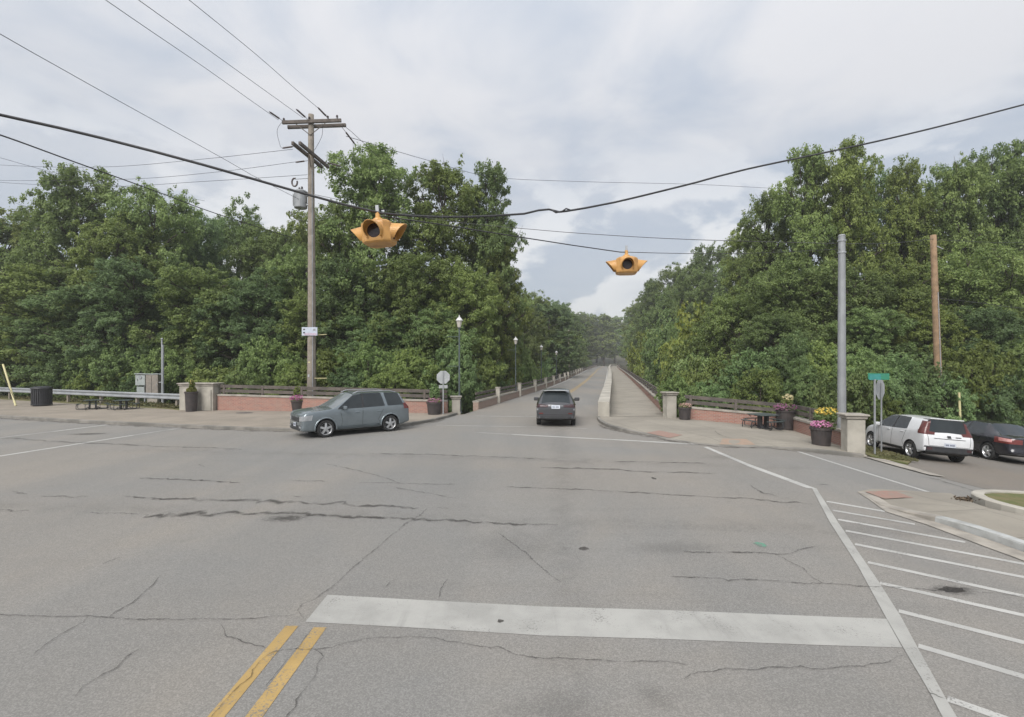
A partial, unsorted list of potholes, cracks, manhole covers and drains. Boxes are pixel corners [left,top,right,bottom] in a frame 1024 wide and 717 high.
crack [211,626,877,717]
crack [134,478,523,525]
